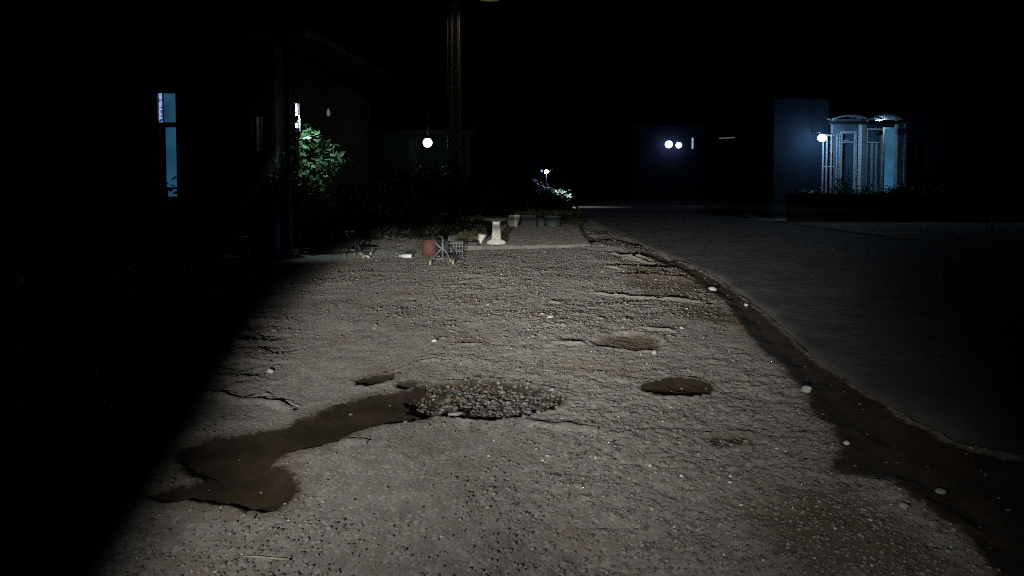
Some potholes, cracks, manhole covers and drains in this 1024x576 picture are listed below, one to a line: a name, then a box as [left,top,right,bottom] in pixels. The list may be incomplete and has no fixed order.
pothole [582,330,672,353]
pothole [396,377,579,423]
pothole [696,430,762,453]
crack [197,389,301,412]
crack [519,417,598,434]
pothole [346,372,402,389]
pothole [389,380,426,399]
crack [589,252,708,303]
pothole [634,376,719,399]
